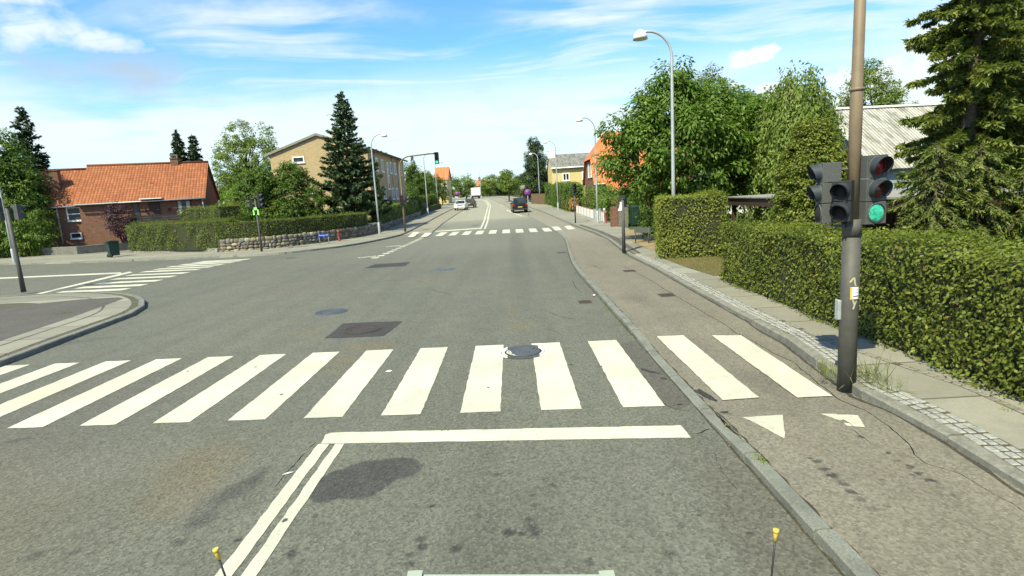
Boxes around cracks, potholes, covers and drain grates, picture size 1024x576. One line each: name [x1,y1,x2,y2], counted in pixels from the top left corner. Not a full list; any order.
manhole cover [343,325,383,334]
manhole cover [498,345,548,359]
